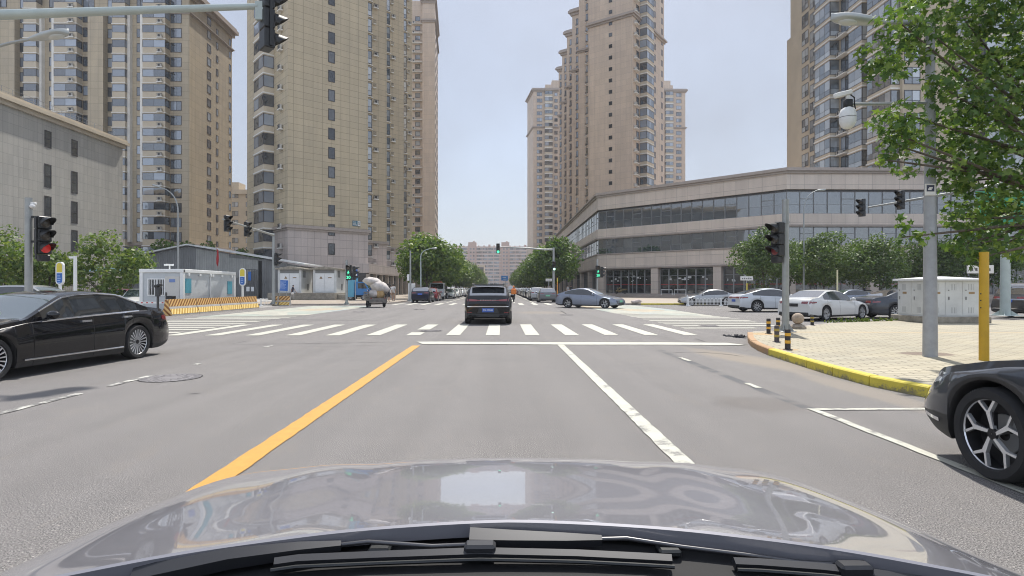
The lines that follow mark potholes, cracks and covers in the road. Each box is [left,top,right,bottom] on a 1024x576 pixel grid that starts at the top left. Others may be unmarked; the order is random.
manhole cover [137,373,203,382]
